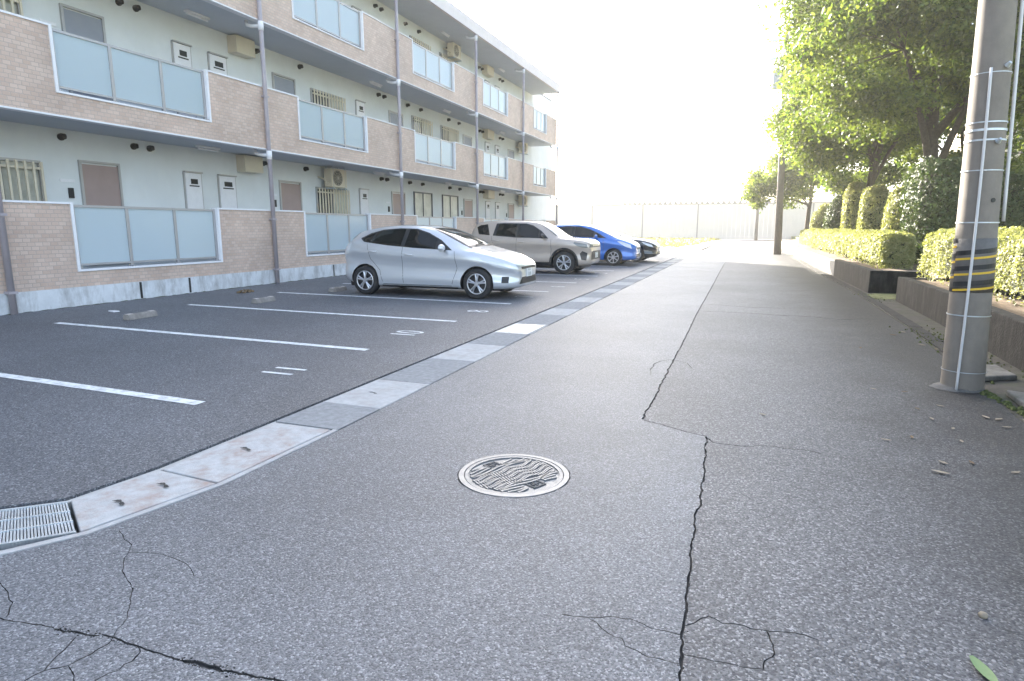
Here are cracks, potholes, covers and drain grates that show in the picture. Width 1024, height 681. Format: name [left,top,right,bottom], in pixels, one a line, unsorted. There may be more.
crack [0,530,284,681]
manhole cover [457,454,571,498]
